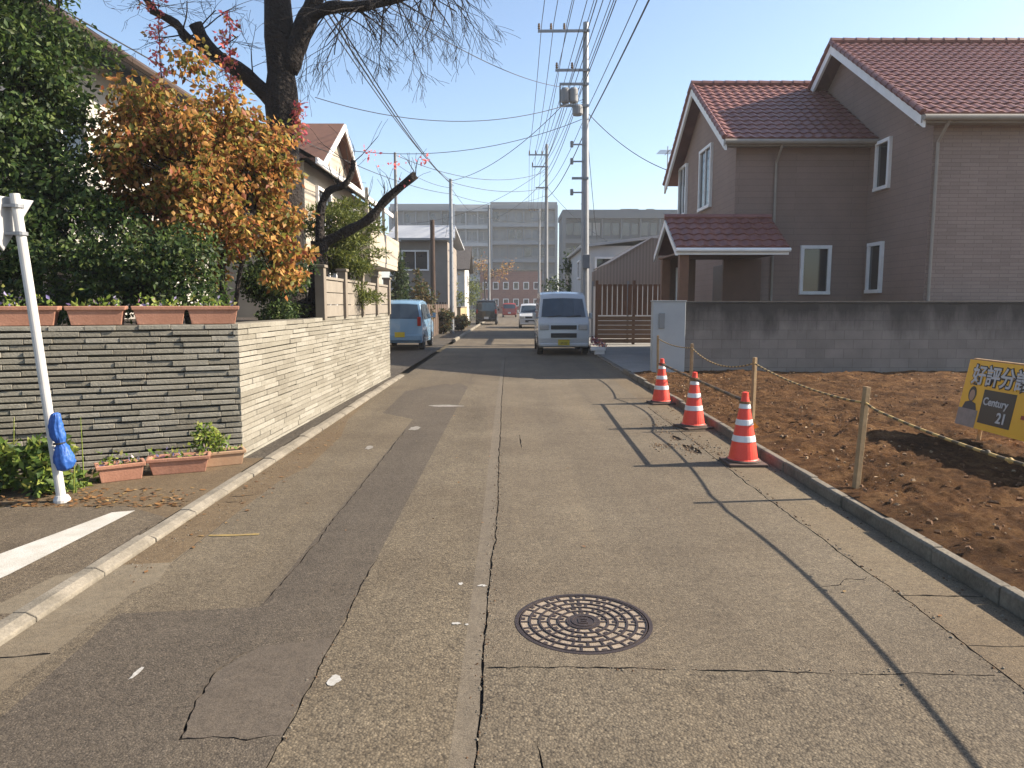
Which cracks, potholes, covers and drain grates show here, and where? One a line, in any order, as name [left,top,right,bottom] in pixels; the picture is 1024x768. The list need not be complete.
manhole cover [515,594,653,655]
crack [174,431,405,768]
crack [473,363,1024,768]
